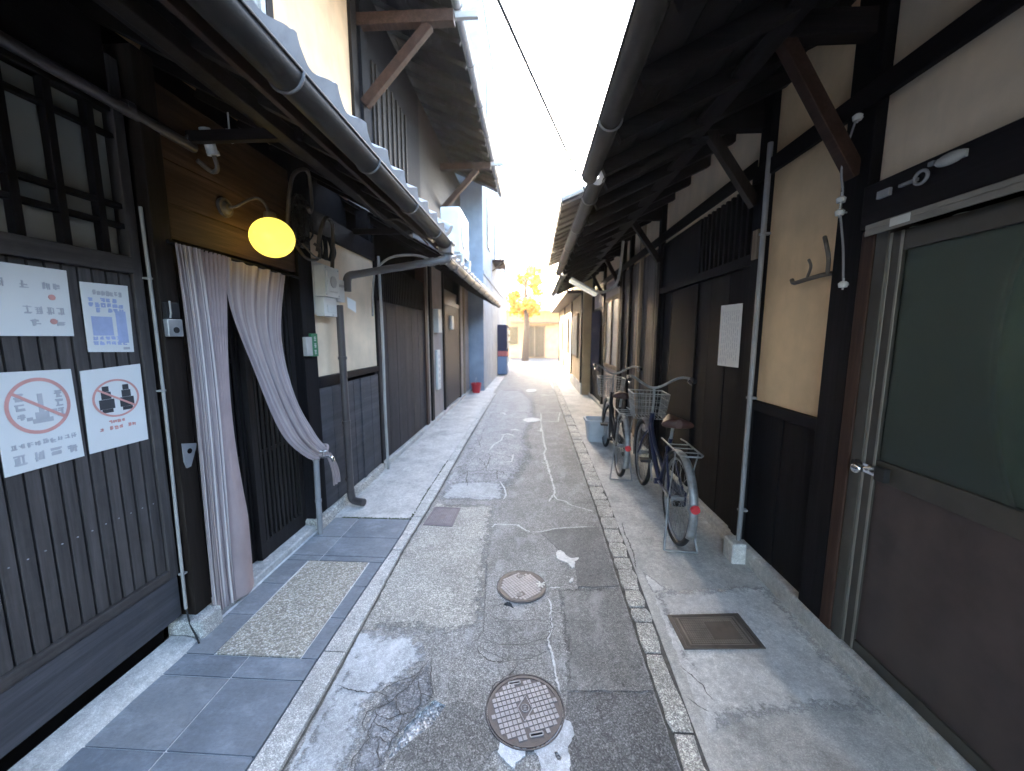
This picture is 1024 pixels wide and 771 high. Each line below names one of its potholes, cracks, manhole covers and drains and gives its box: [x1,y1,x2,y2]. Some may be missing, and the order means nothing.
crack [339,659,435,771]
manhole cover [485,674,565,752]
manhole cover [497,571,546,604]
crack [465,412,594,532]
manhole cover [667,613,766,650]
manhole cover [423,506,461,527]
